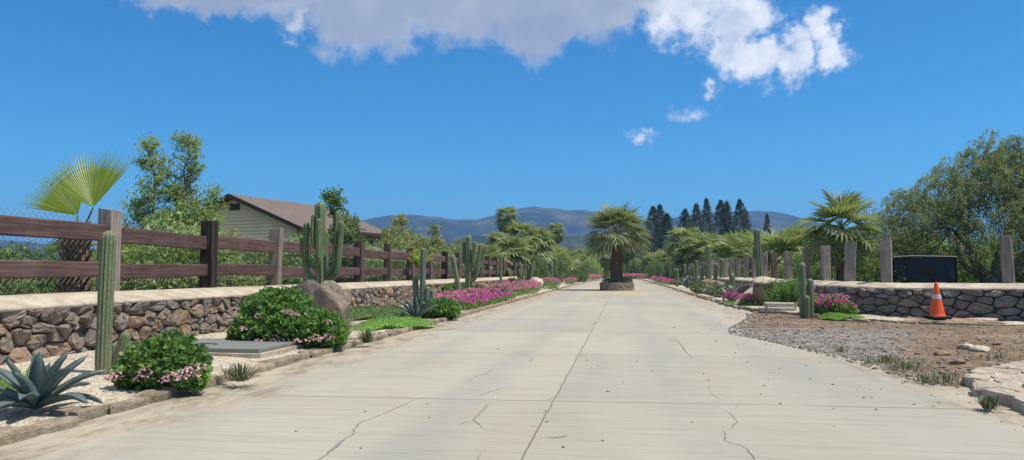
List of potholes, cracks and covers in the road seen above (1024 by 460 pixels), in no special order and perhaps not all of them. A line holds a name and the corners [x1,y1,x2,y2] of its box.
utility cover [194,338,306,358]
crack [319,396,428,459]
